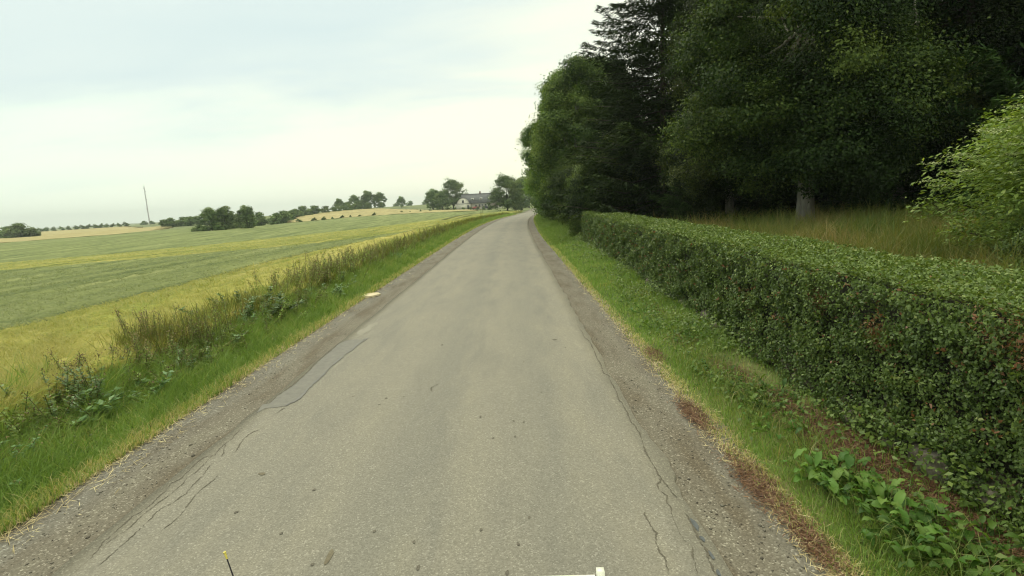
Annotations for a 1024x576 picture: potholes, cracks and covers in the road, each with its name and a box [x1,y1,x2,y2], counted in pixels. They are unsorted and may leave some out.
crack [578,326,715,574]
crack [76,430,257,571]
